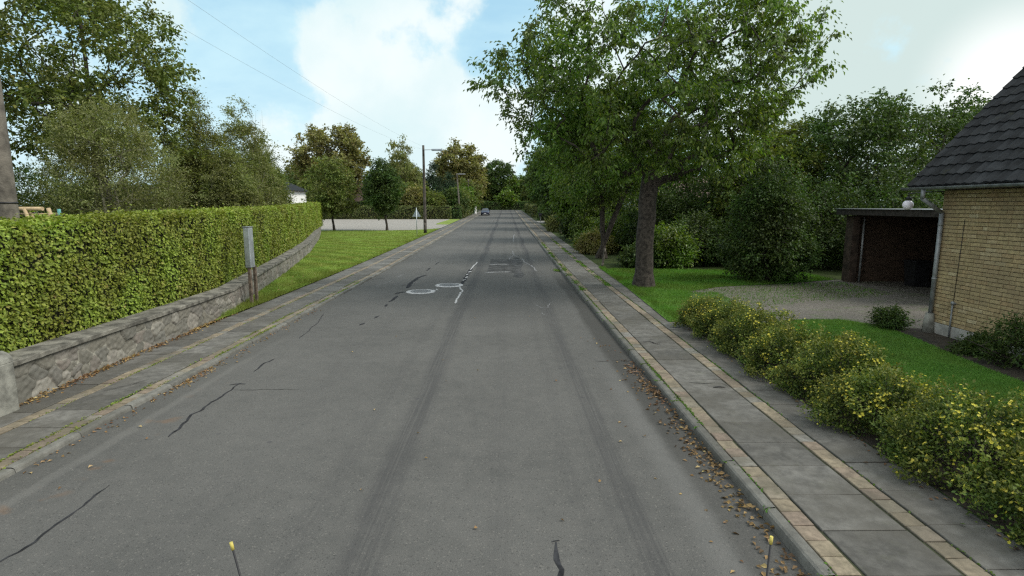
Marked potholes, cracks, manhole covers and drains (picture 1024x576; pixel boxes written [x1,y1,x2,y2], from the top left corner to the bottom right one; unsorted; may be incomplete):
crack [0,485,109,562]
